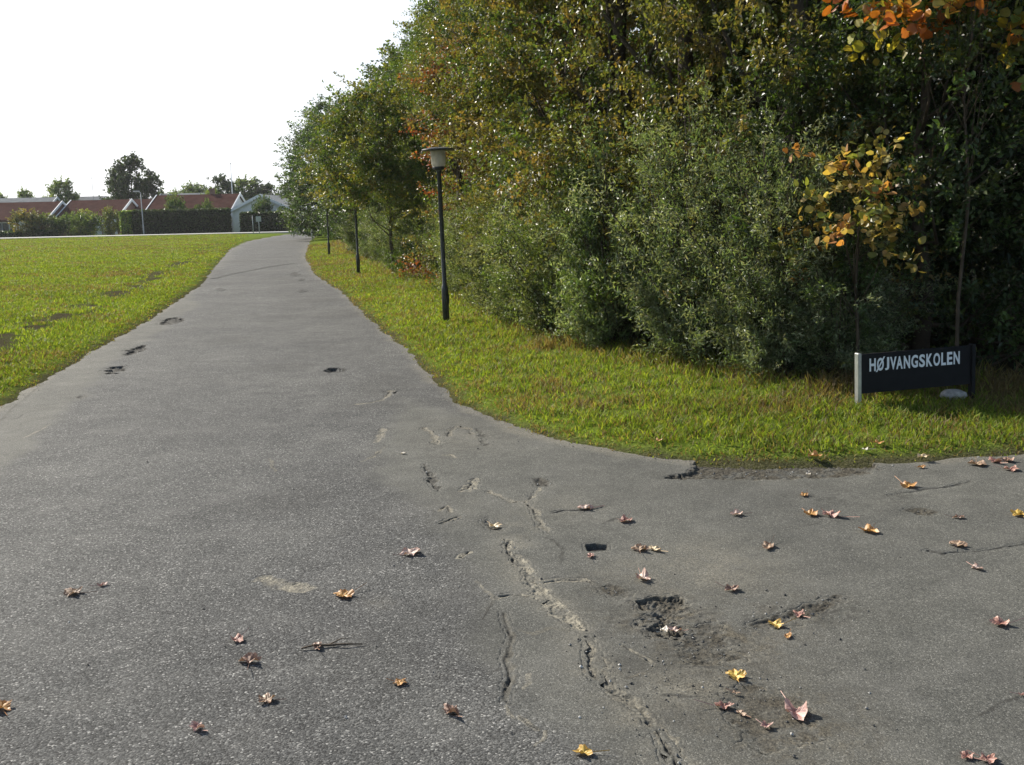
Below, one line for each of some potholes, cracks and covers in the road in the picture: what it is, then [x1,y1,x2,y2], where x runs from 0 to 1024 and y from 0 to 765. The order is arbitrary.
crack [419,425,728,765]
crack [888,480,976,496]
pothole [582,542,611,553]
crack [922,542,1024,556]
pothole [745,593,854,633]
pothole [625,594,699,642]
pothole [118,345,151,356]
pothole [157,316,187,326]
pothole [99,365,133,375]
